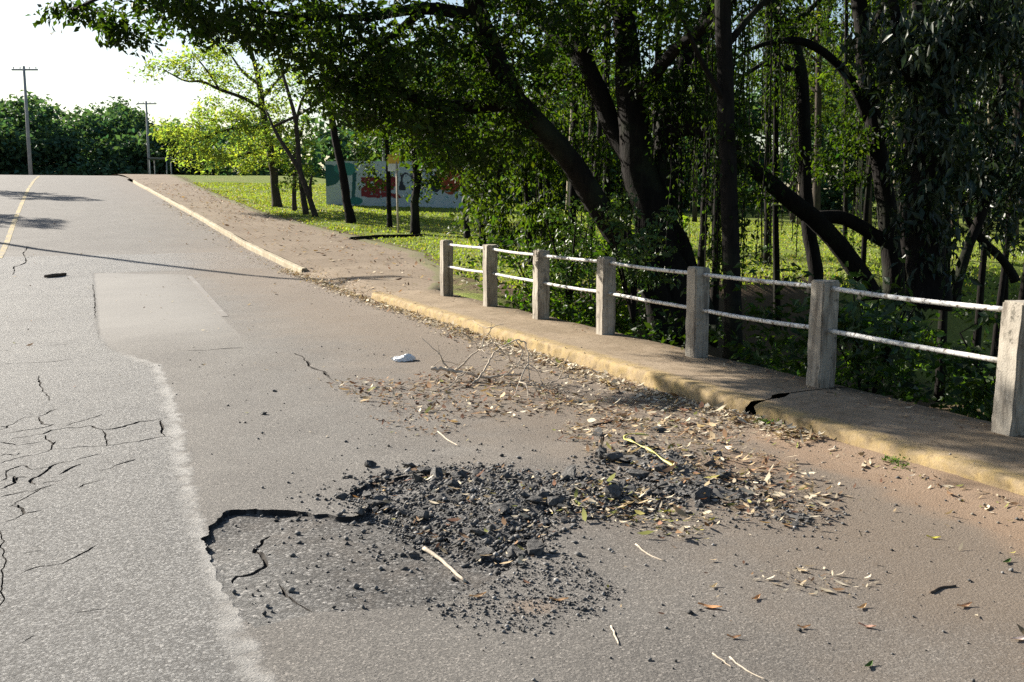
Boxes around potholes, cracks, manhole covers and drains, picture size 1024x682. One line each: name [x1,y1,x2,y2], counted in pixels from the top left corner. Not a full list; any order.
crack [294,353,339,384]
pothole [200,472,555,629]
crack [0,344,173,612]
